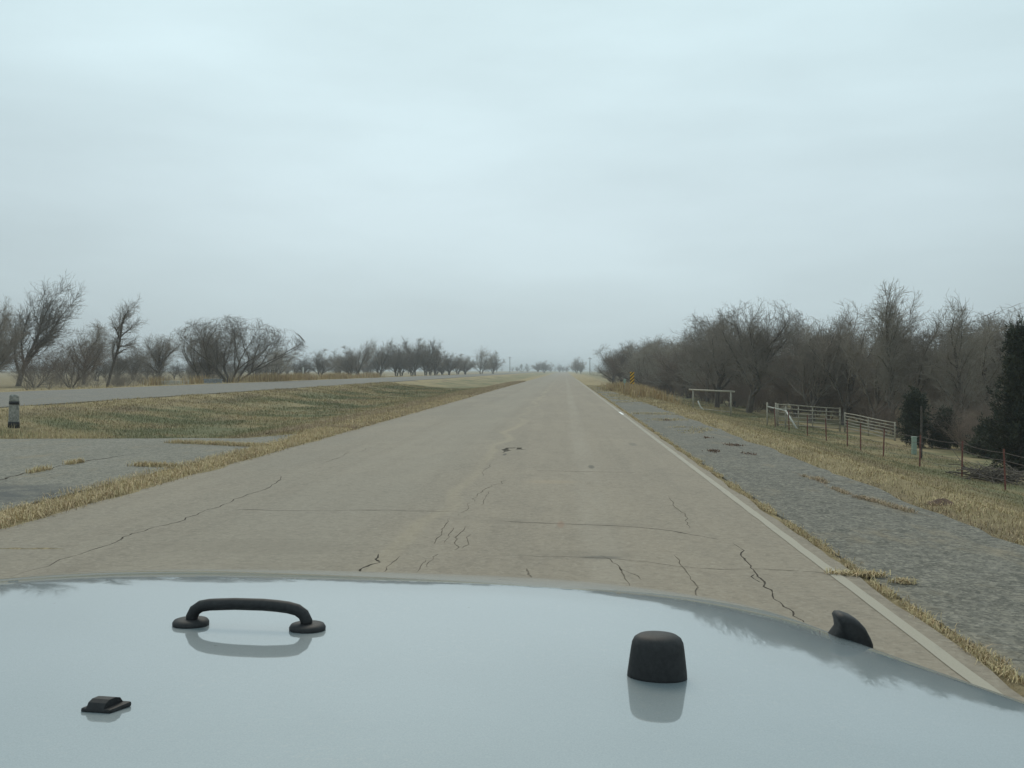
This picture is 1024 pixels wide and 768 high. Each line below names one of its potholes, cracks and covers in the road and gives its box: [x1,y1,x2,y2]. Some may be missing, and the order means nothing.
crack [0,465,824,622]
